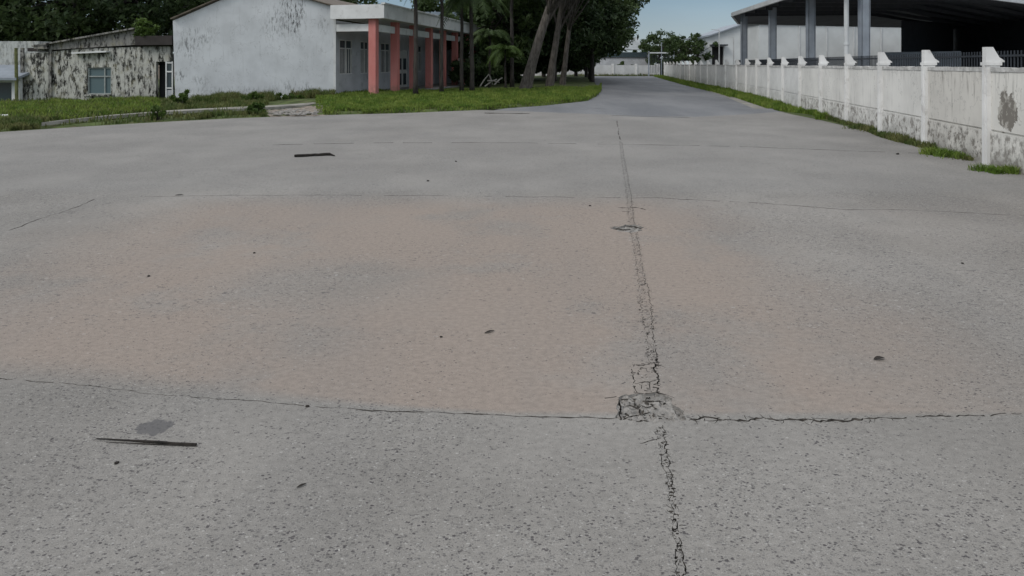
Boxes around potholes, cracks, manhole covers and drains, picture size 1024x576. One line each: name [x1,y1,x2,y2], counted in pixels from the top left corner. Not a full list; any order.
crack [688,413,1014,426]
pothole [611,224,644,233]
crack [608,122,674,398]
crack [640,425,687,576]
pothole [615,392,687,424]
